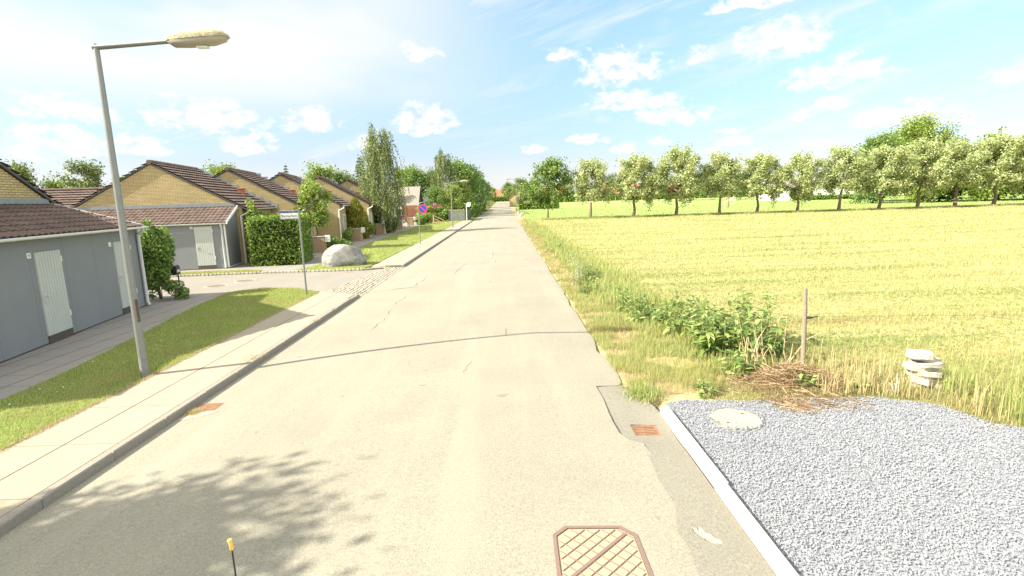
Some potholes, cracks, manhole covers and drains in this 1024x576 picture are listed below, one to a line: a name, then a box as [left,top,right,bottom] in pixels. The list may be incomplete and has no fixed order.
manhole cover [553,526,654,576]
manhole cover [709,409,763,430]
drain grate [631,425,663,436]
drain grate [189,403,224,412]
